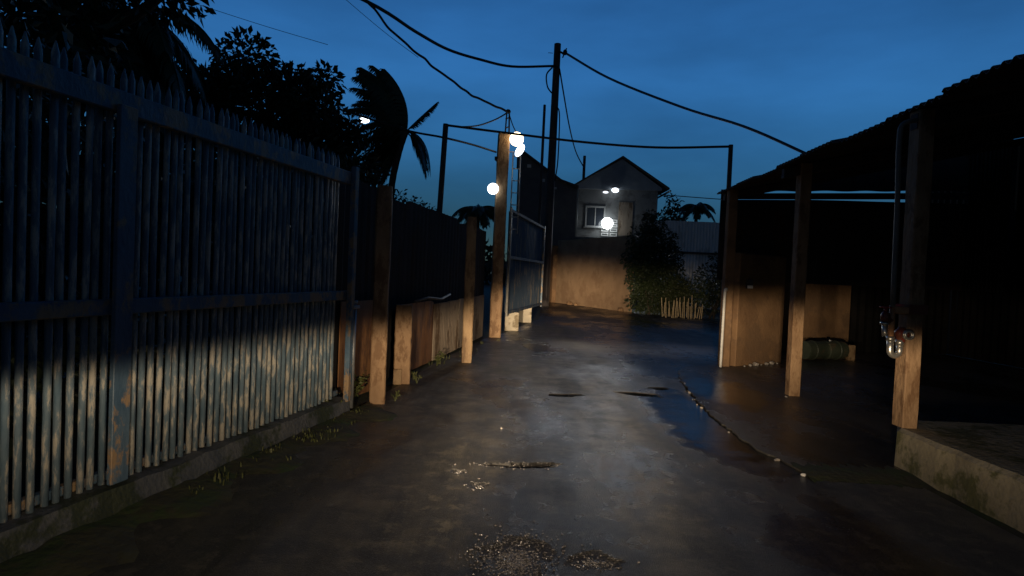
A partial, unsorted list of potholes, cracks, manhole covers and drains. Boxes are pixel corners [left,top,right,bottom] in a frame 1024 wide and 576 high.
pothole [464,478,490,491]
pothole [454,461,577,470]
pothole [549,543,640,572]
pothole [450,520,580,576]
